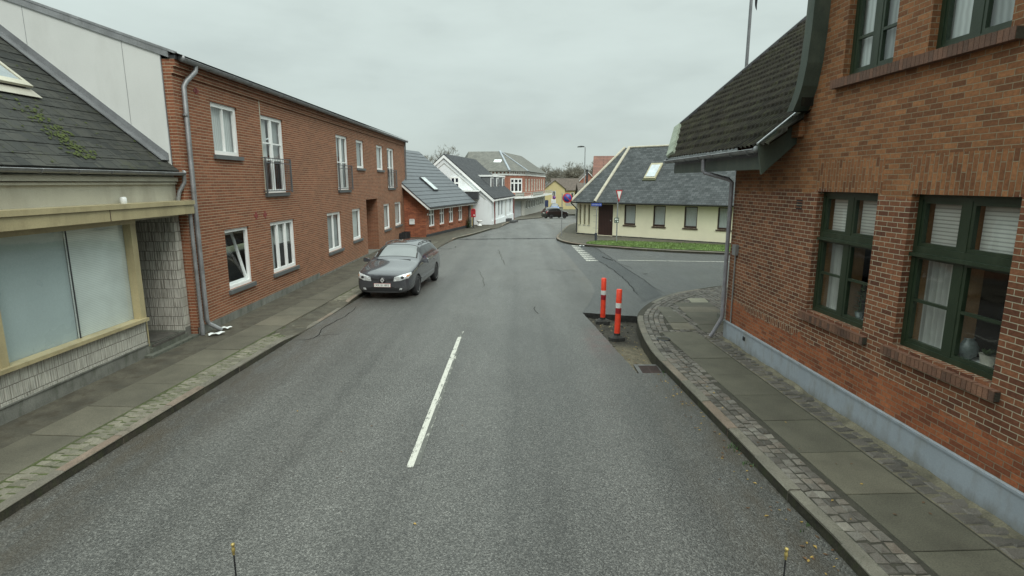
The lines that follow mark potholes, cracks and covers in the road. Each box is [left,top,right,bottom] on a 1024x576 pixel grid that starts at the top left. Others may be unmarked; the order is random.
drain grate [633,364,662,373]
crack [439,236,555,287]
crack [596,248,662,294]
